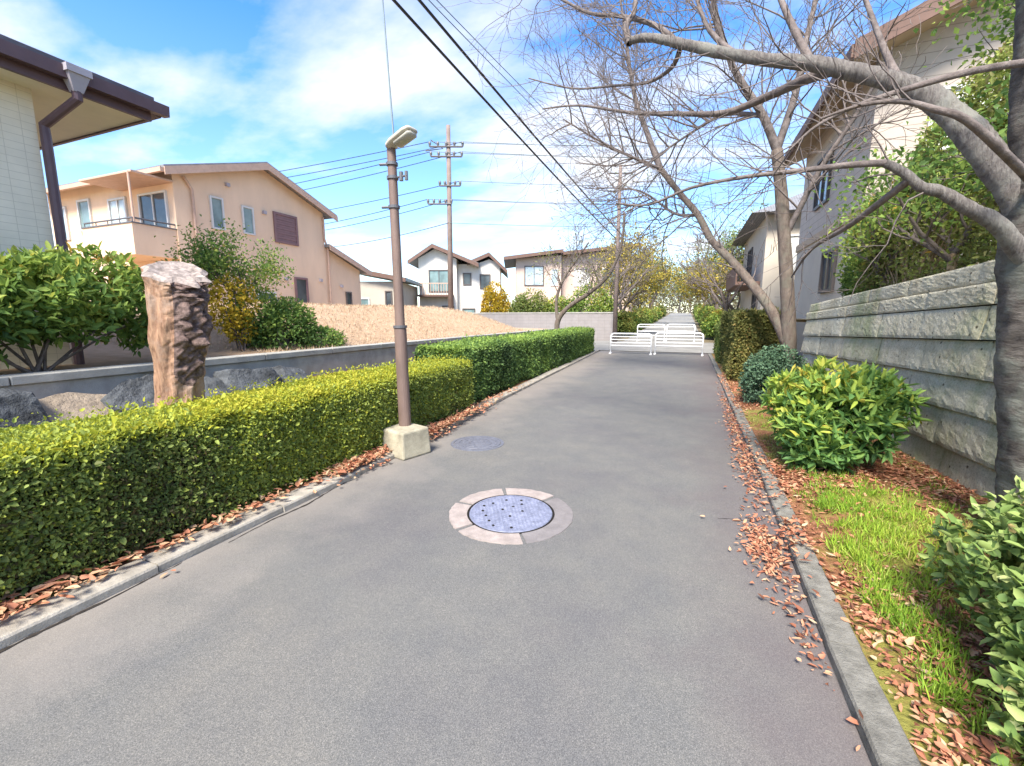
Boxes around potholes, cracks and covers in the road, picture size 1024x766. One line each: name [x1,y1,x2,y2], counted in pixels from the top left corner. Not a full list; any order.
manhole cover [451,436,504,451]
manhole cover [449,488,573,545]
